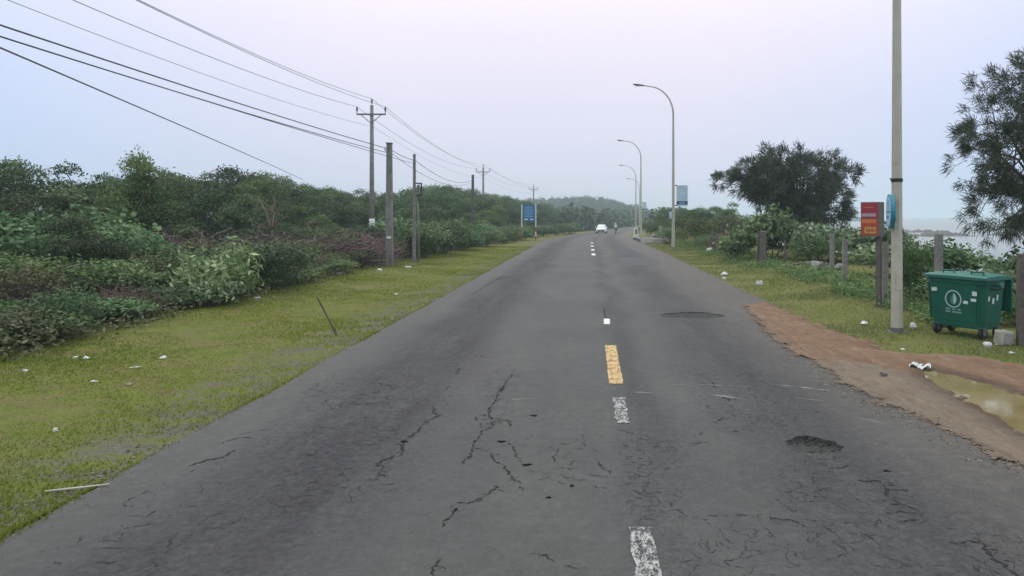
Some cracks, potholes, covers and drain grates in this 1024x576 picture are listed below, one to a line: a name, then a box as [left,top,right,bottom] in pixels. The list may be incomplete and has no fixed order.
crack [931,528,1024,576]
crack [683,454,927,576]
crack [442,356,686,527]
crack [270,373,440,514]
crack [189,429,272,472]
pothole [784,435,844,454]
